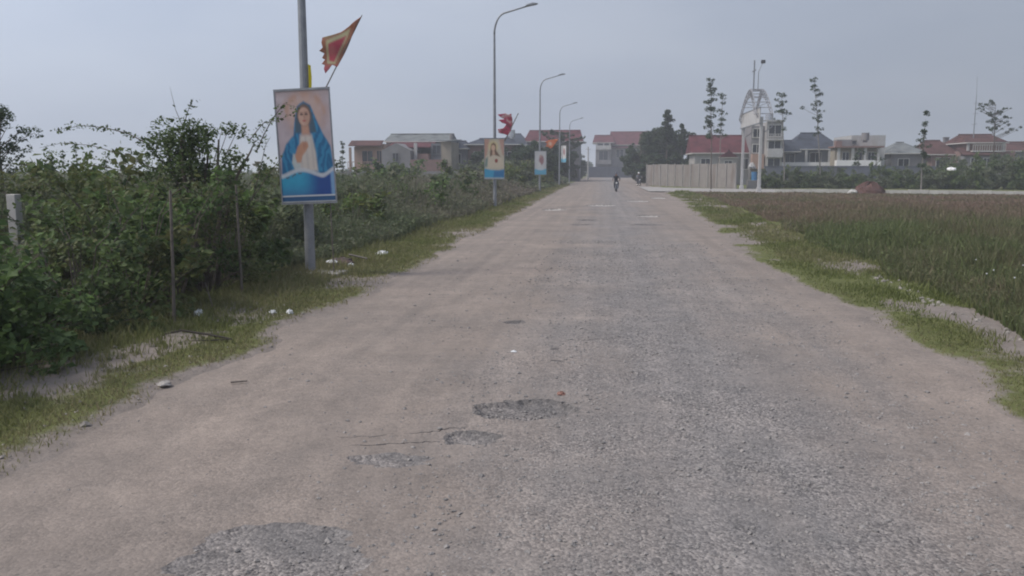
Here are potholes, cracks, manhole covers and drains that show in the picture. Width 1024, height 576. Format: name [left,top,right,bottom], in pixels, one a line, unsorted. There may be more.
pothole [346,452,433,468]
pothole [472,399,583,421]
crack [337,427,464,446]
pothole [442,430,503,445]
